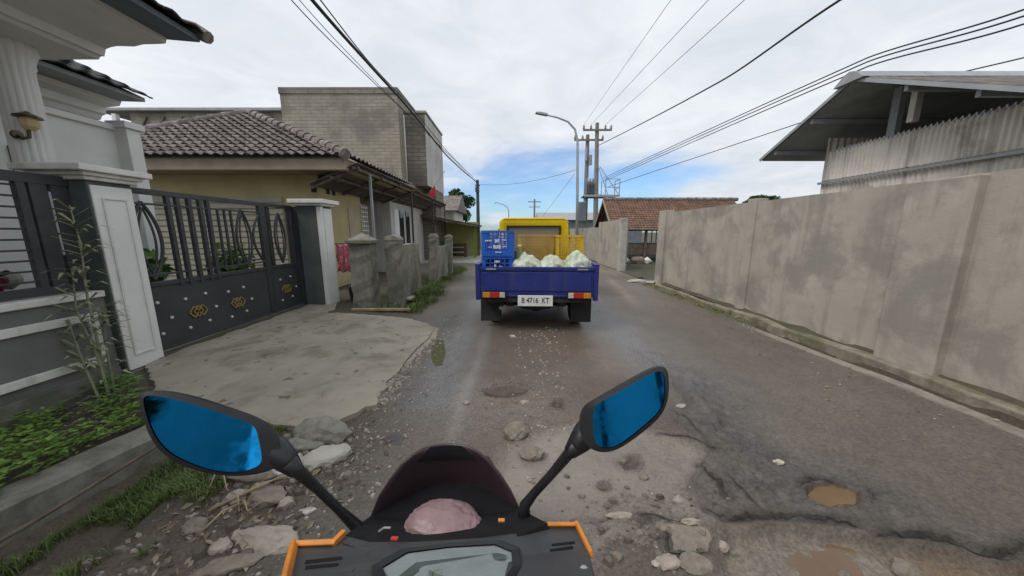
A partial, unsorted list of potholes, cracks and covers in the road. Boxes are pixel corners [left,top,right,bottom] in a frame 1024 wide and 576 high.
pothole [700,517,1024,576]
pothole [478,383,531,401]
crack [877,530,1024,559]
pothole [797,477,868,510]
crack [659,412,713,448]
pothole [548,398,566,410]
crack [700,465,874,527]
